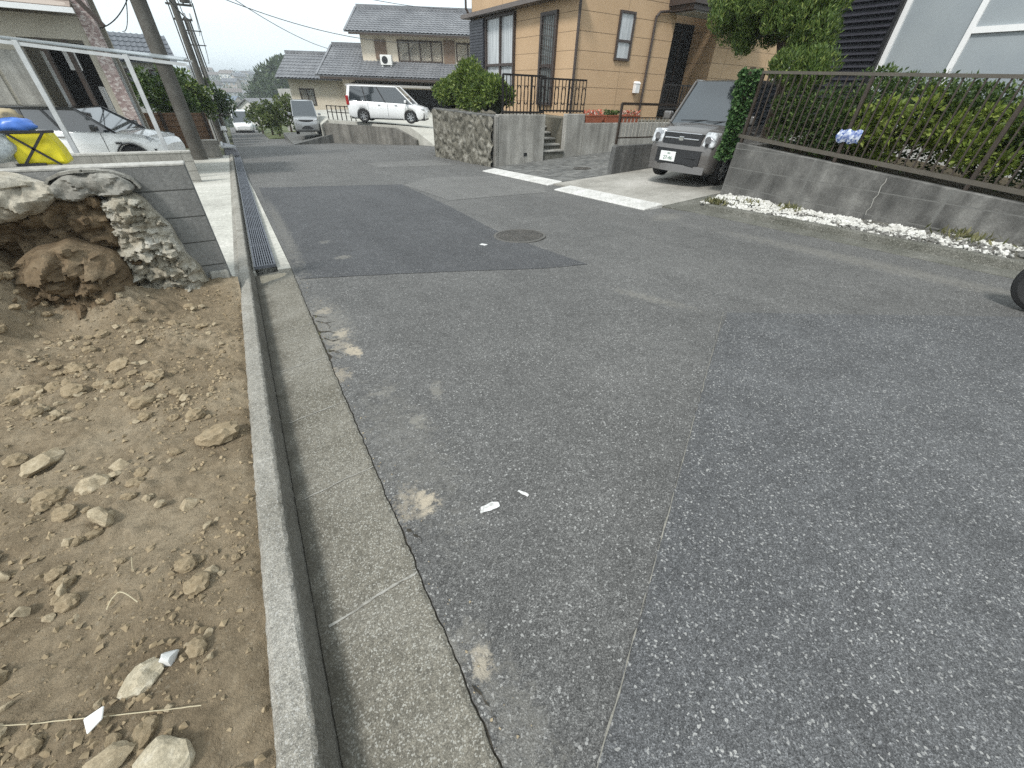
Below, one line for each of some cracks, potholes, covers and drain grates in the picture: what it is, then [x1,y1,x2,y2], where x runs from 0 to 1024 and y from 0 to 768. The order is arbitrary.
crack [297,283,503,768]
drain grate [250,243,277,270]
drain grate [243,205,260,217]
drain grate [245,215,264,229]
manhole cover [494,229,546,243]
drain grate [247,227,269,245]
drain grate [242,197,256,206]
